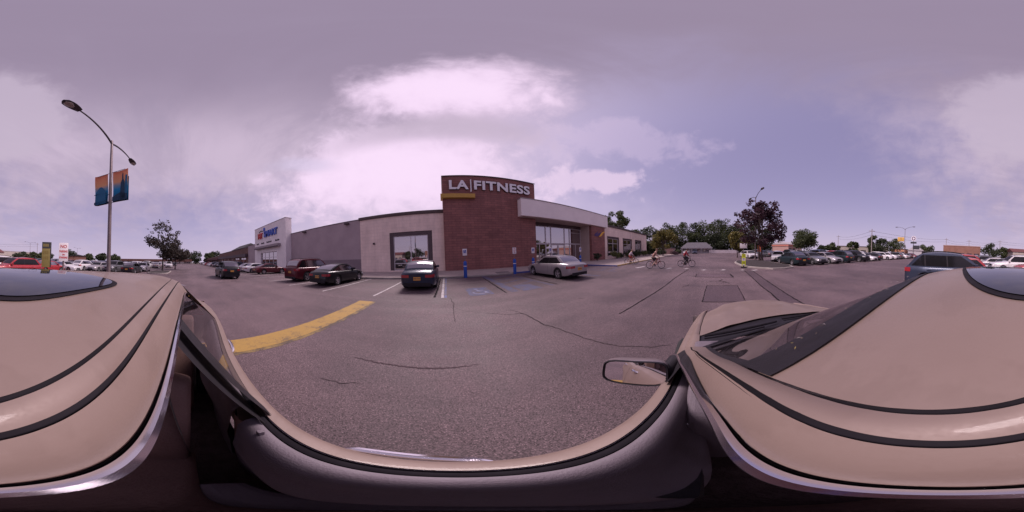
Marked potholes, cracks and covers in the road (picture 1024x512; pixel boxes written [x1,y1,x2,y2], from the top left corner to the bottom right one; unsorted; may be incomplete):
crack [359,358,477,369]
crack [450,282,666,347]
